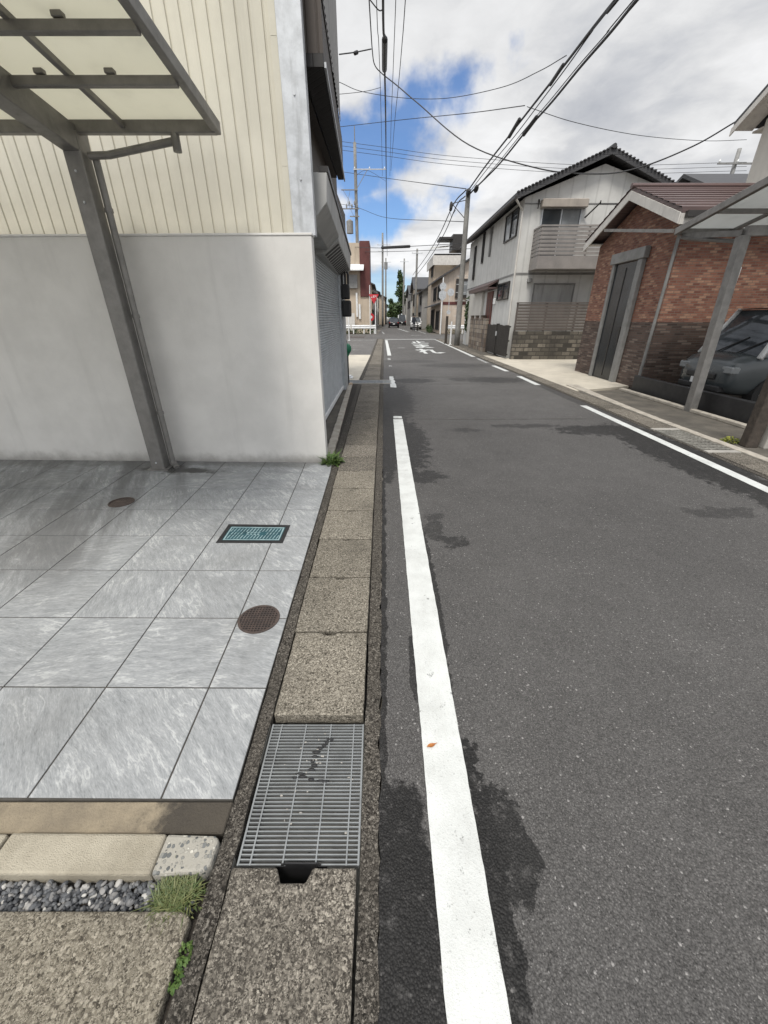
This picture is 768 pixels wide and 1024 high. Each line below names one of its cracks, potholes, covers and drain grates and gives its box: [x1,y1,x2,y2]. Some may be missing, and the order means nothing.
drain grate [237,724,364,884]
drain grate [655,430,730,450]
manhole cover [107,497,135,507]
manhole cover [237,605,280,634]
